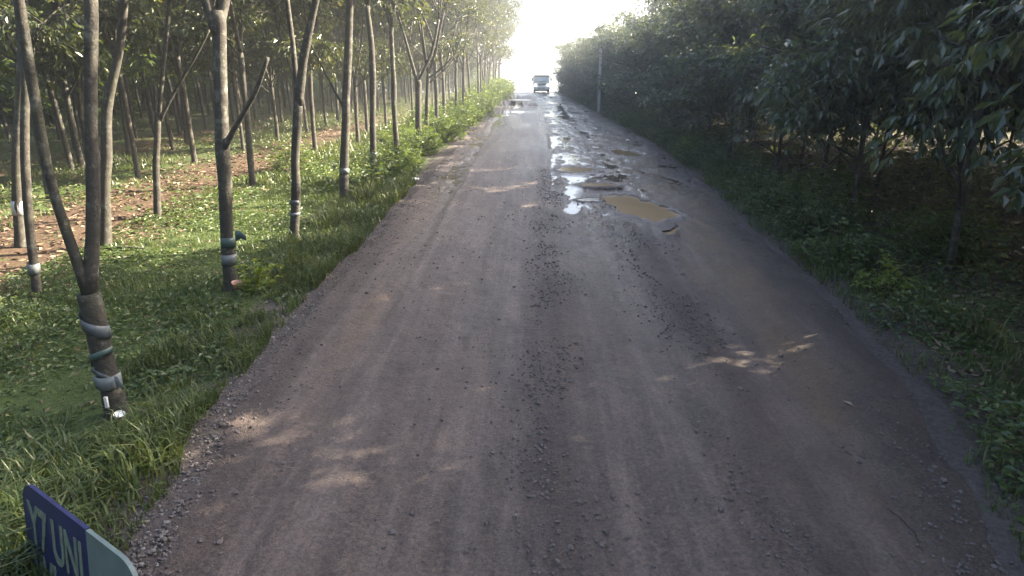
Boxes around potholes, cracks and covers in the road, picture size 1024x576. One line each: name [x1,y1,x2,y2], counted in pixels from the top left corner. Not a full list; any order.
pothole [553,166,600,174]
pothole [605,147,650,158]
pothole [590,190,694,231]
